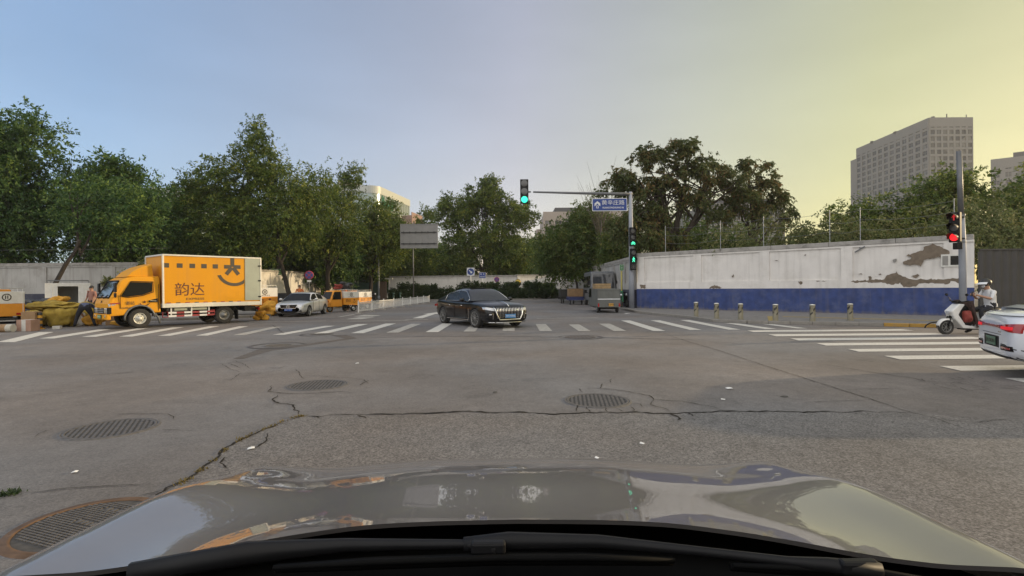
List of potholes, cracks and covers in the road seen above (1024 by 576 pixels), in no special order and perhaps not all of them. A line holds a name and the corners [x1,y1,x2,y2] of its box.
manhole cover [57,418,161,441]
crack [19,370,368,496]
manhole cover [564,393,631,409]
manhole cover [286,380,349,391]
crack [316,379,873,420]
